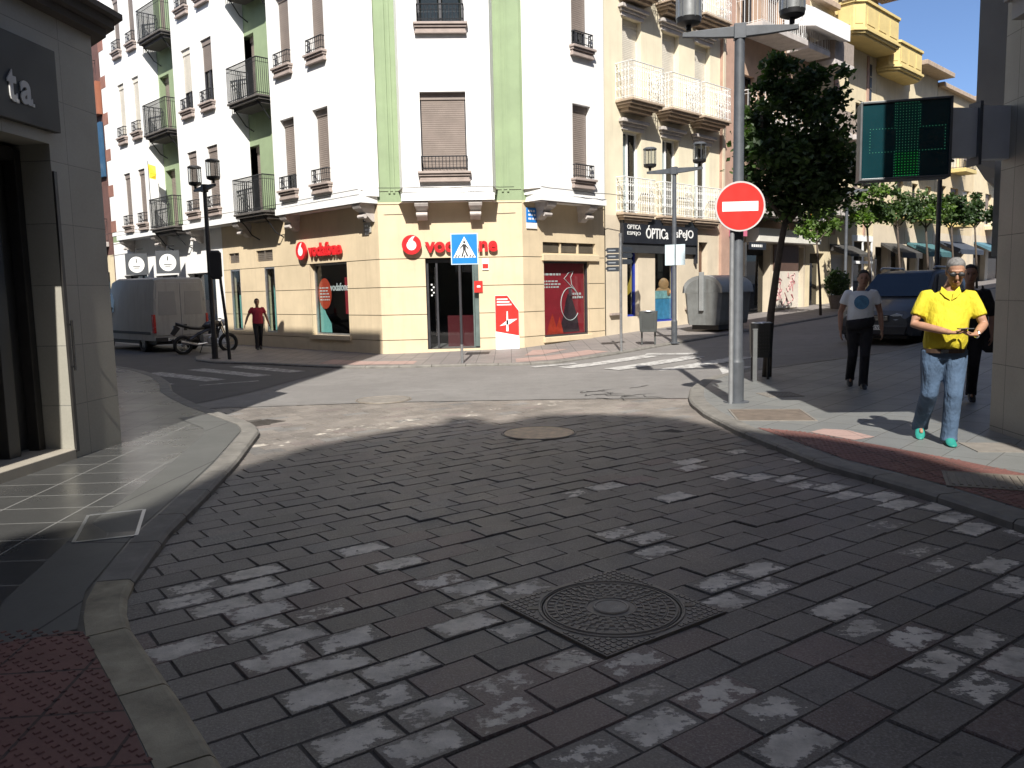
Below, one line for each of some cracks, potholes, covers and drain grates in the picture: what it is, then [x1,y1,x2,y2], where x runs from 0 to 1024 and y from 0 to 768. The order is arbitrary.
crack [580,385,661,400]
manhole cover [501,569,726,659]
manhole cover [71,509,146,543]
manhole cover [501,426,577,440]
manhole cover [355,396,412,404]
manhole cover [728,409,818,421]
